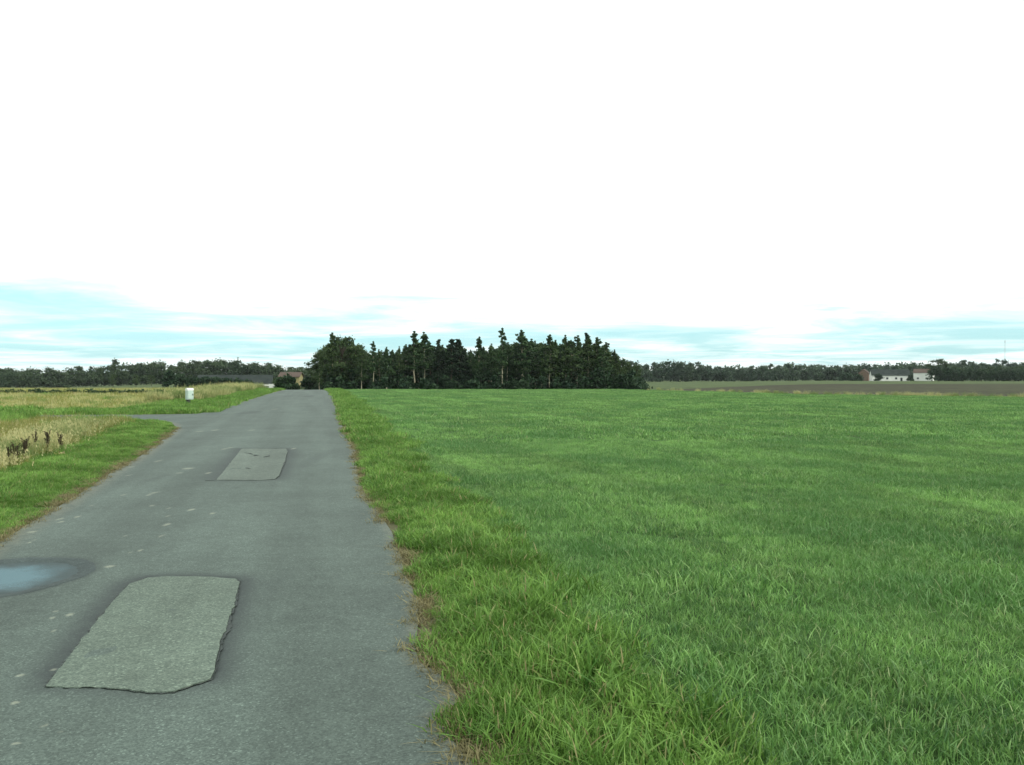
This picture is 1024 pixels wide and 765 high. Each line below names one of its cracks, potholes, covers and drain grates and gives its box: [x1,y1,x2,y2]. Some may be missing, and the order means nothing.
pothole [0,557,96,597]
